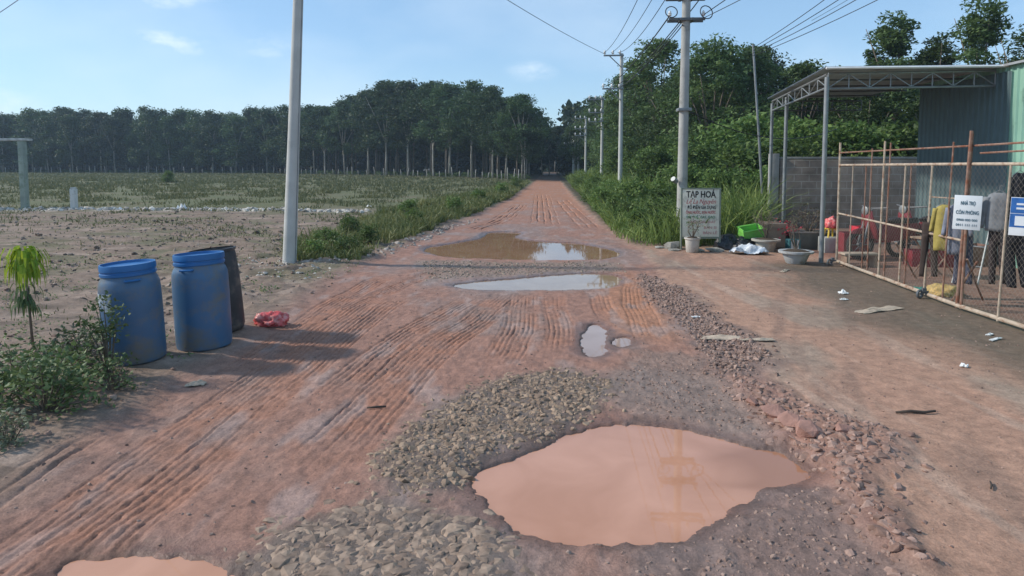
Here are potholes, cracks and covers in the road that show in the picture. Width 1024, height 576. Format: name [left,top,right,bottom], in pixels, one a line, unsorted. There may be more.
pothole [460,416,821,552]
pothole [575,322,615,358]
pothole [39,538,282,576]
pothole [606,335,638,349]
pothole [448,272,626,291]
pothole [421,230,623,260]
